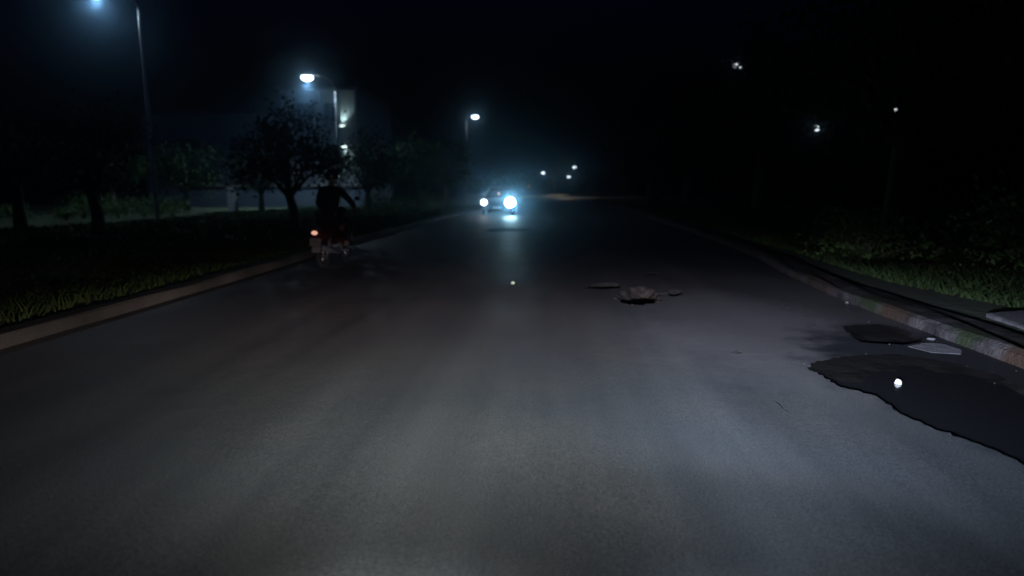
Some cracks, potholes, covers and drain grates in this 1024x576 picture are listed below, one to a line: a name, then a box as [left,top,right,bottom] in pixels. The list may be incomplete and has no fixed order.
pothole [614,287,668,305]
